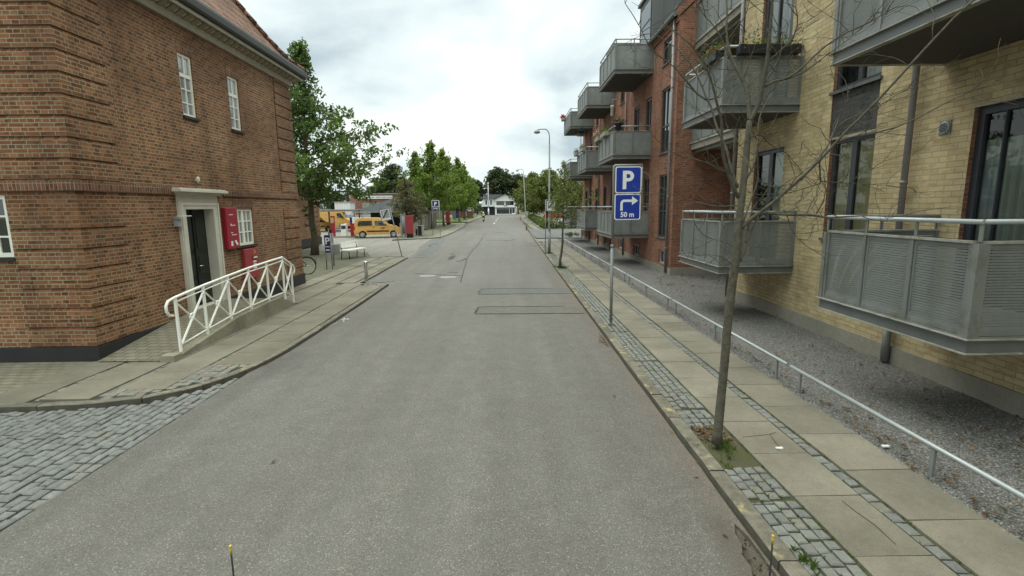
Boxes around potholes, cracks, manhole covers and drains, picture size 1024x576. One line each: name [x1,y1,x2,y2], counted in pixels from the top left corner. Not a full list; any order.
pothole [735,524,777,576]
